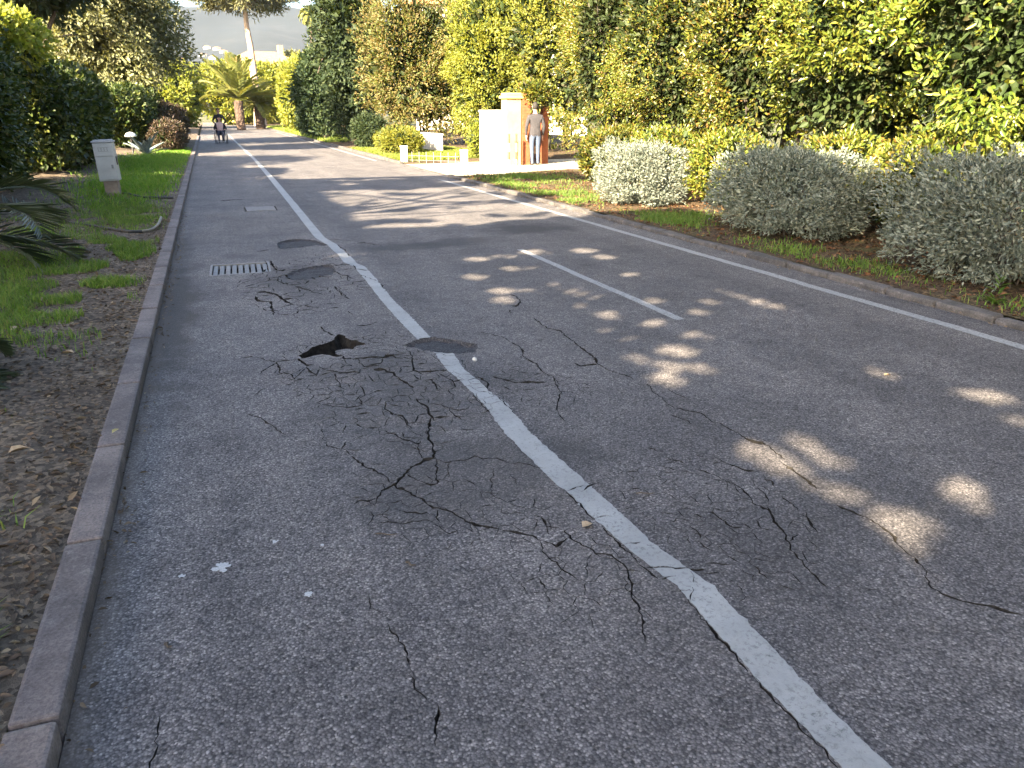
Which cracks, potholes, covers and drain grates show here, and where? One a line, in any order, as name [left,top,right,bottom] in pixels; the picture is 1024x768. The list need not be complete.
drain grate [209,262,271,276]
crack [244,294,1021,768]
crack [237,239,384,318]
pothole [298,334,366,358]
crack [149,717,160,768]
